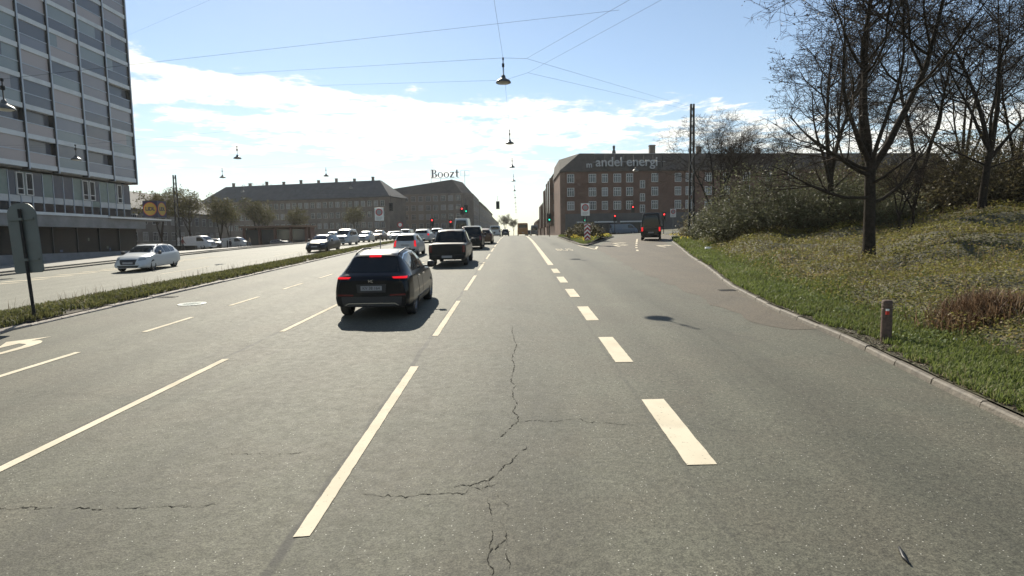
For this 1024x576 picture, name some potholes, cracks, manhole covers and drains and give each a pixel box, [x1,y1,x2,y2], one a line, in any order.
crack [500,330,631,437]
crack [373,445,527,574]
